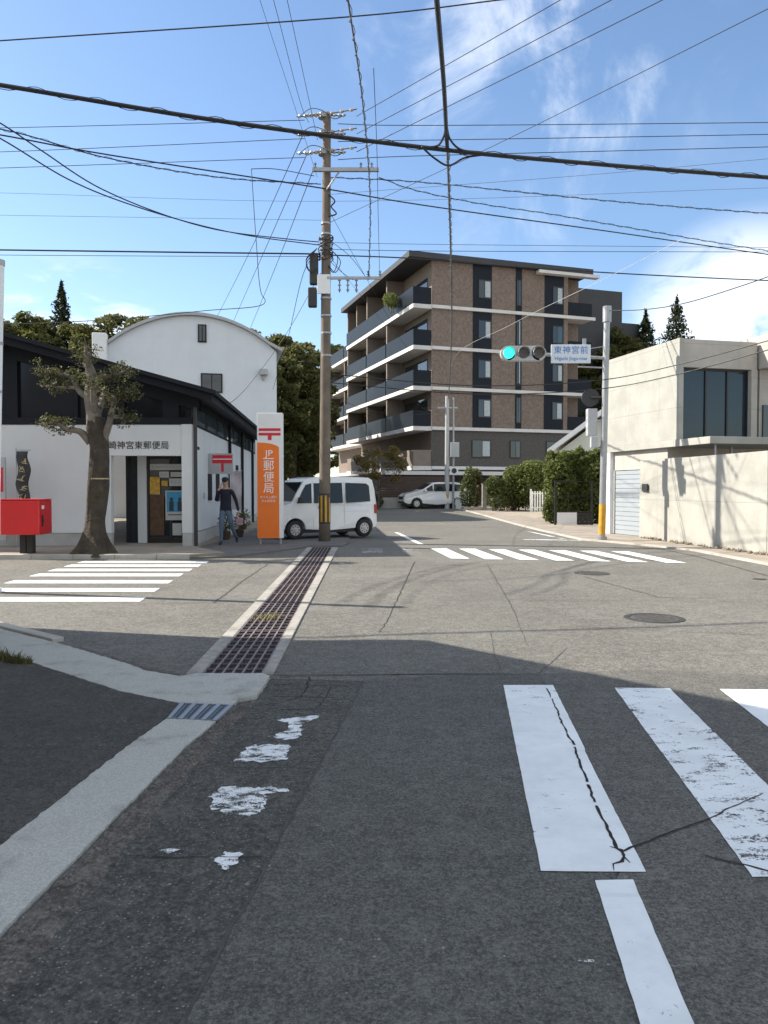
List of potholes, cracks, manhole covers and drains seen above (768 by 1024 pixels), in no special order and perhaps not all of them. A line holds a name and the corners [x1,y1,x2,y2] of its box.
manhole cover [623,613,686,623]
drain grate [166,702,235,723]
crack [546,688,768,871]
drain grate [186,547,338,676]
crack [260,677,334,710]
